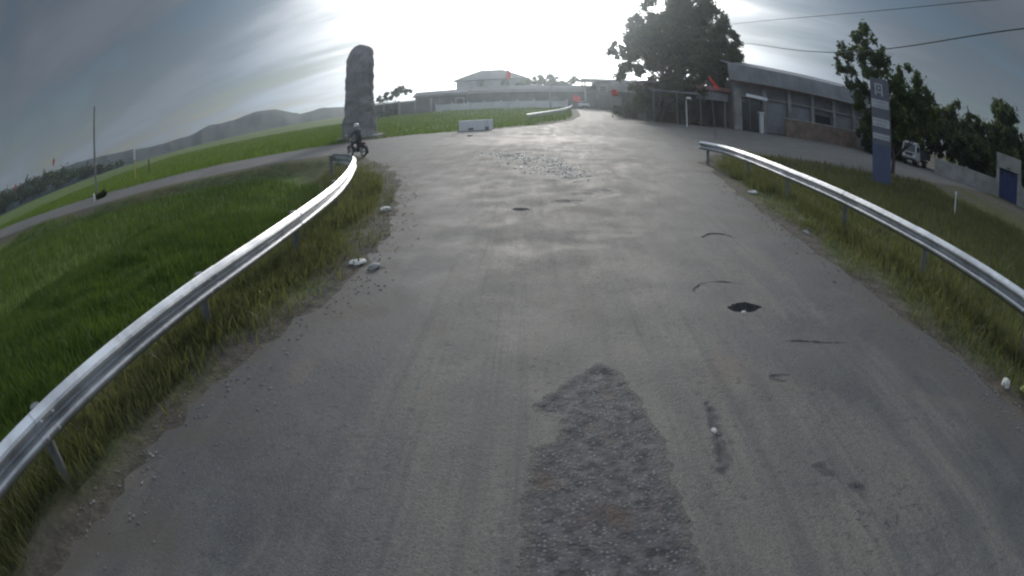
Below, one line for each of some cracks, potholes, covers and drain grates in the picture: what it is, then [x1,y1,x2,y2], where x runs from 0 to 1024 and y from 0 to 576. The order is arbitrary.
crack [769,374,791,382]
pothole [727,302,762,313]
crack [692,281,744,292]
